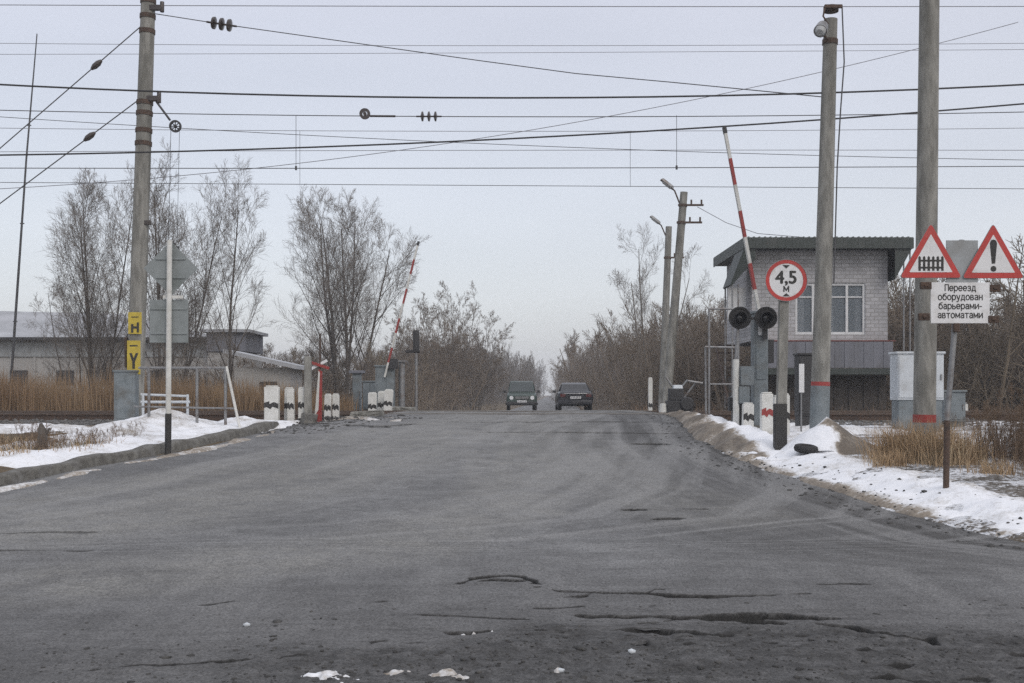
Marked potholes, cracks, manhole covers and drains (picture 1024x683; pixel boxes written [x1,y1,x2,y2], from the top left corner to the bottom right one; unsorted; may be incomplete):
crack [67,580,975,683]
